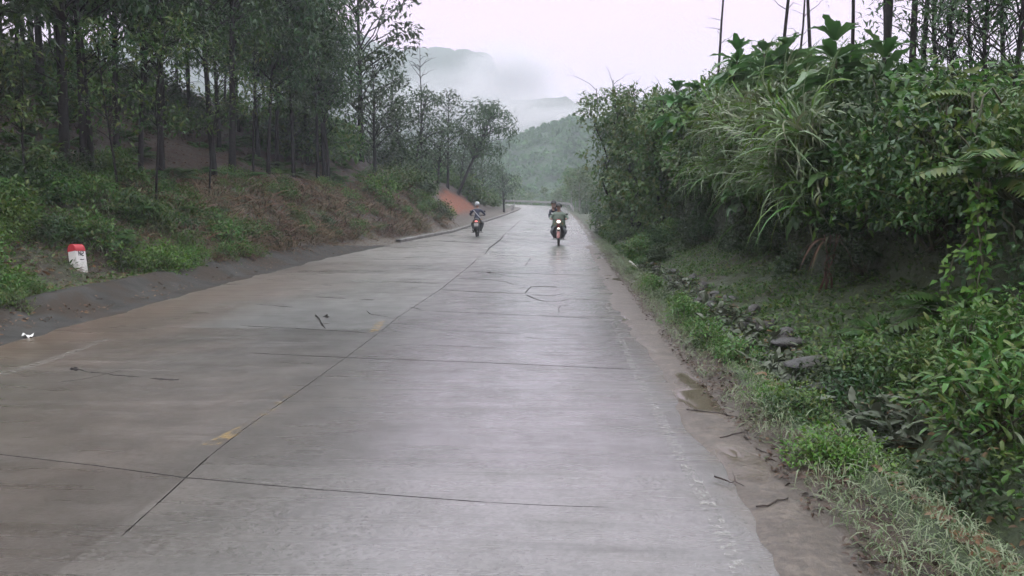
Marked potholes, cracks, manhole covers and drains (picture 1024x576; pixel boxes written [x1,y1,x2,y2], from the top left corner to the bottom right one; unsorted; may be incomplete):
crack [63,368,179,382]
crack [457,252,606,318]
